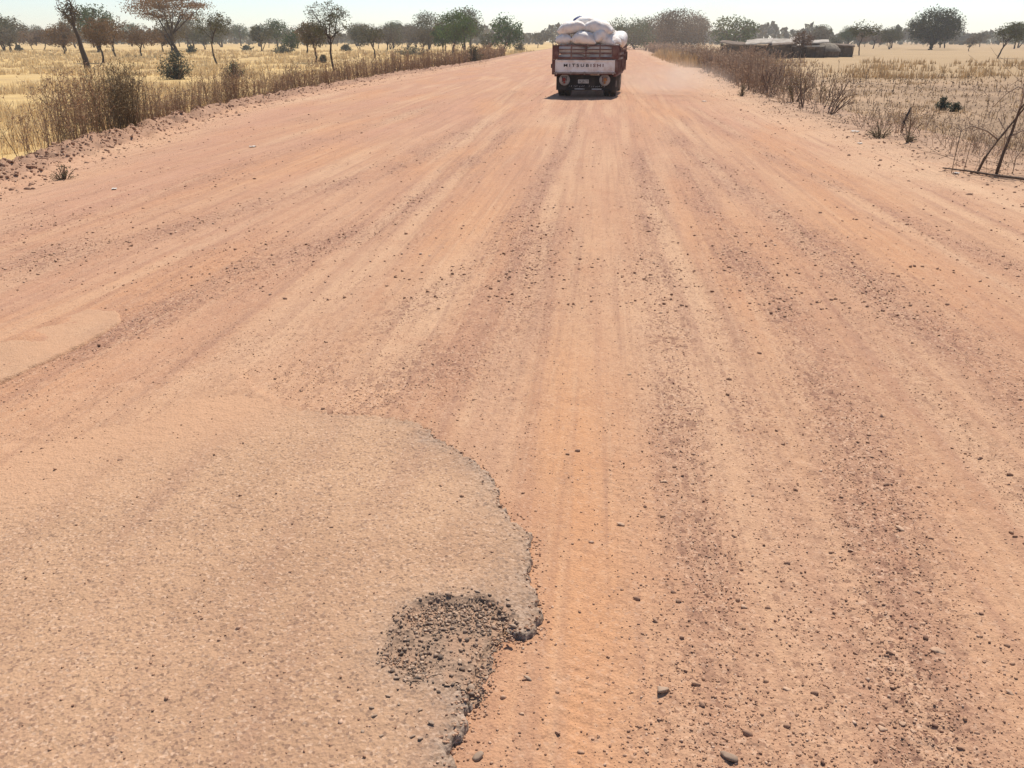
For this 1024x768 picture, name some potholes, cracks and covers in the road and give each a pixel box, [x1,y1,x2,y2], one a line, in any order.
pothole [371,587,526,707]
